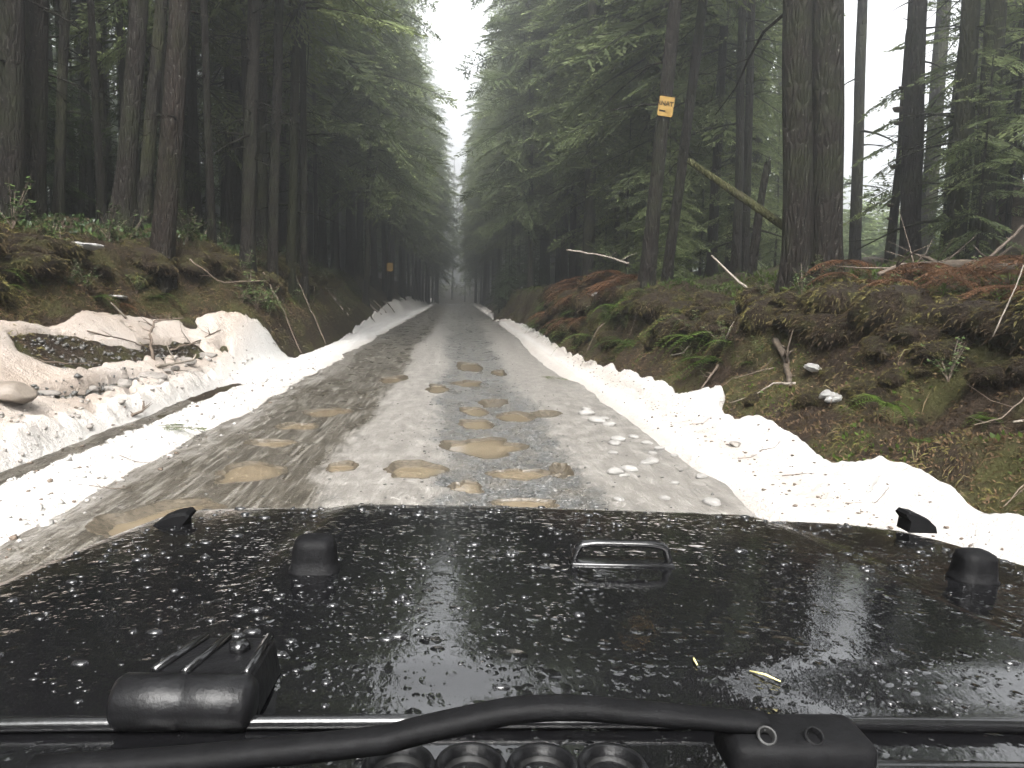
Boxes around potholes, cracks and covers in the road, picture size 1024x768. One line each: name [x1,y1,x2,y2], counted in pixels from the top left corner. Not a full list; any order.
pothole [243,438,297,448]
pothole [456,361,483,372]
pothole [490,498,560,508]
pothole [450,379,482,387]
pothole [85,497,228,538]
pothole [478,399,509,408]
pothole [378,375,408,384]
pothole [458,419,495,430]
pothole [438,437,530,459]
pothole [495,411,538,422]
pothole [447,480,485,494]
pothole [302,408,354,417]
